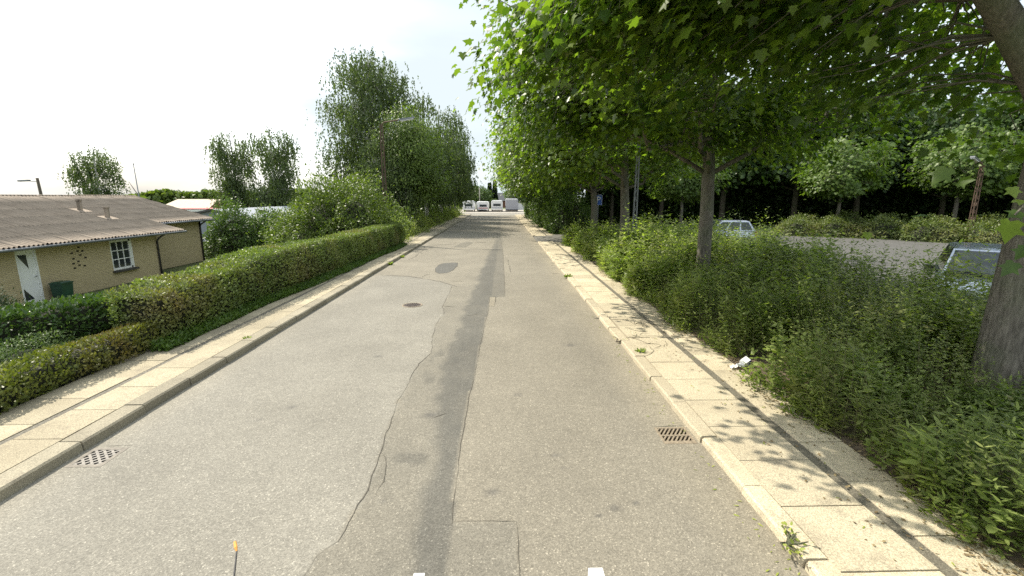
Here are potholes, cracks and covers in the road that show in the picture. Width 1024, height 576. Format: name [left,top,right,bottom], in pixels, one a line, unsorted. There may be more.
crack [305,251,452,574]
drain grate [654,427,698,444]
drain grate [63,447,129,468]
